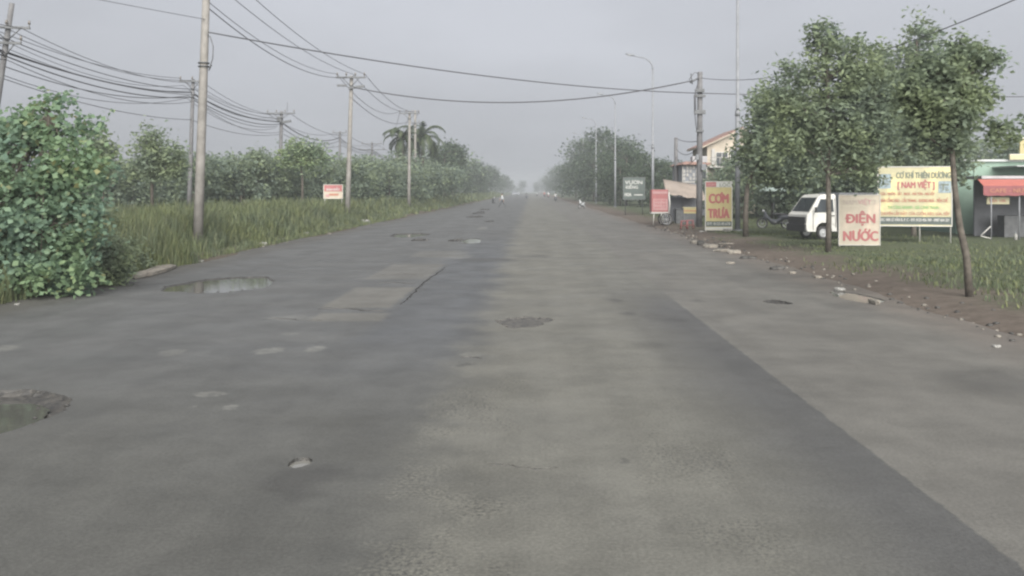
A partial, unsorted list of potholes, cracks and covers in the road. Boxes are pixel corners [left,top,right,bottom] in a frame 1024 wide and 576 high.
pothole [161,276,275,293]
pothole [288,457,313,468]
pothole [495,316,554,328]
pothole [0,389,72,434]
crack [384,267,446,305]
